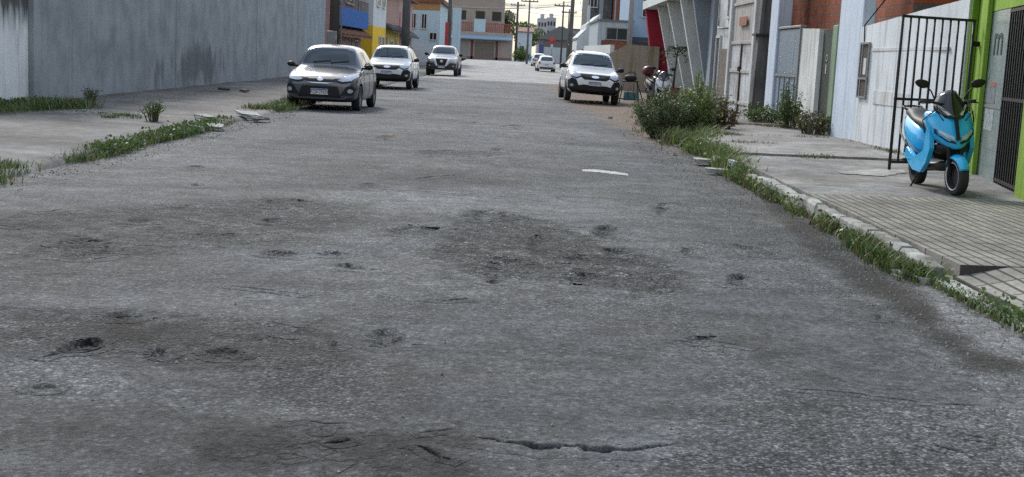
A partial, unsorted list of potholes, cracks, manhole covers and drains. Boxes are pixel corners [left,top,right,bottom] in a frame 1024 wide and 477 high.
pothole [16,380,71,395]
pothole [546,253,611,265]
pothole [30,336,117,361]
pothole [355,326,423,353]
pothole [133,345,189,361]
pothole [641,204,681,218]
pothole [254,248,314,261]
pothole [591,247,643,260]
pothole [473,254,536,278]
